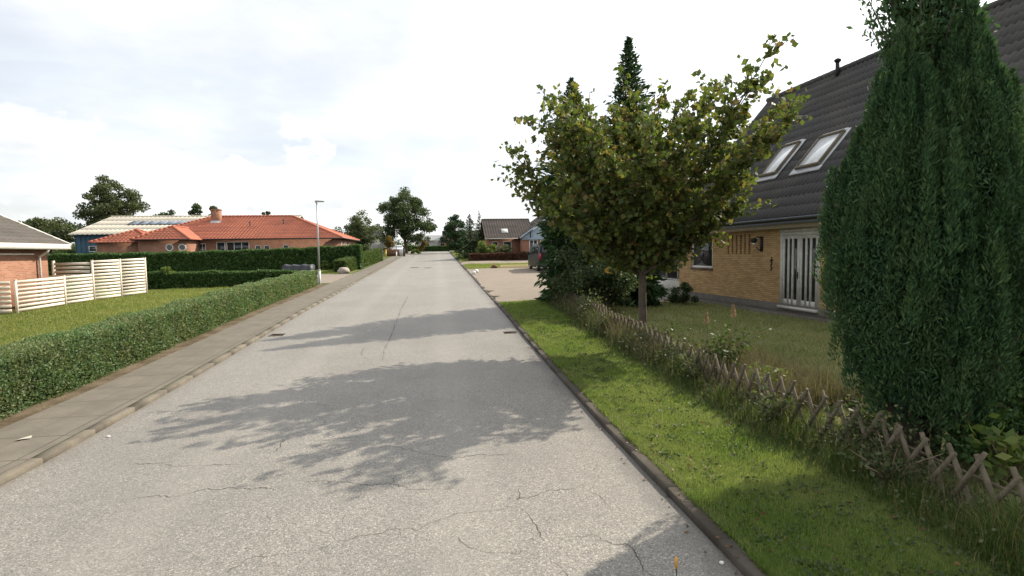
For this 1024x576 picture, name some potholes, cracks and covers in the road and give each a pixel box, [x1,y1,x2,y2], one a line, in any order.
crack [227,488,572,575]
